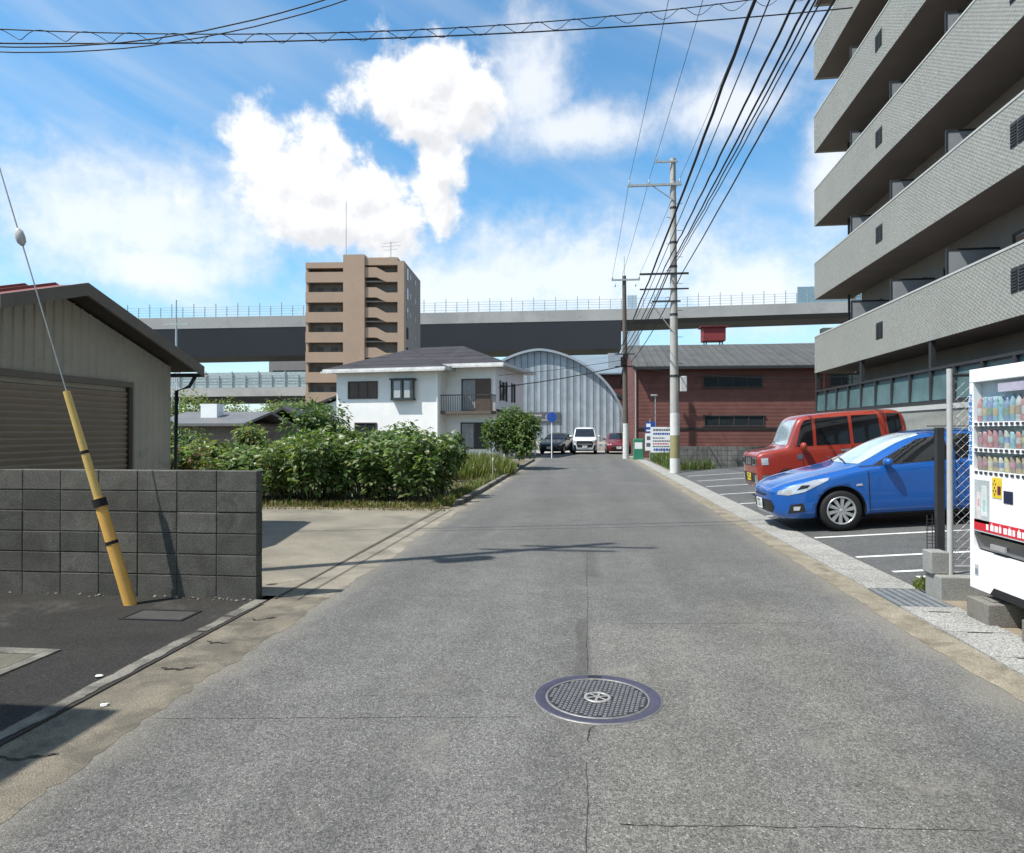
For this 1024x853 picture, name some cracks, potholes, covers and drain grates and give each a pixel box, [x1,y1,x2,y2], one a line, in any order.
utility cover [0,647,61,676]
utility cover [118,609,202,622]
manhole cover [533,675,663,725]
drain grate [870,588,953,607]
